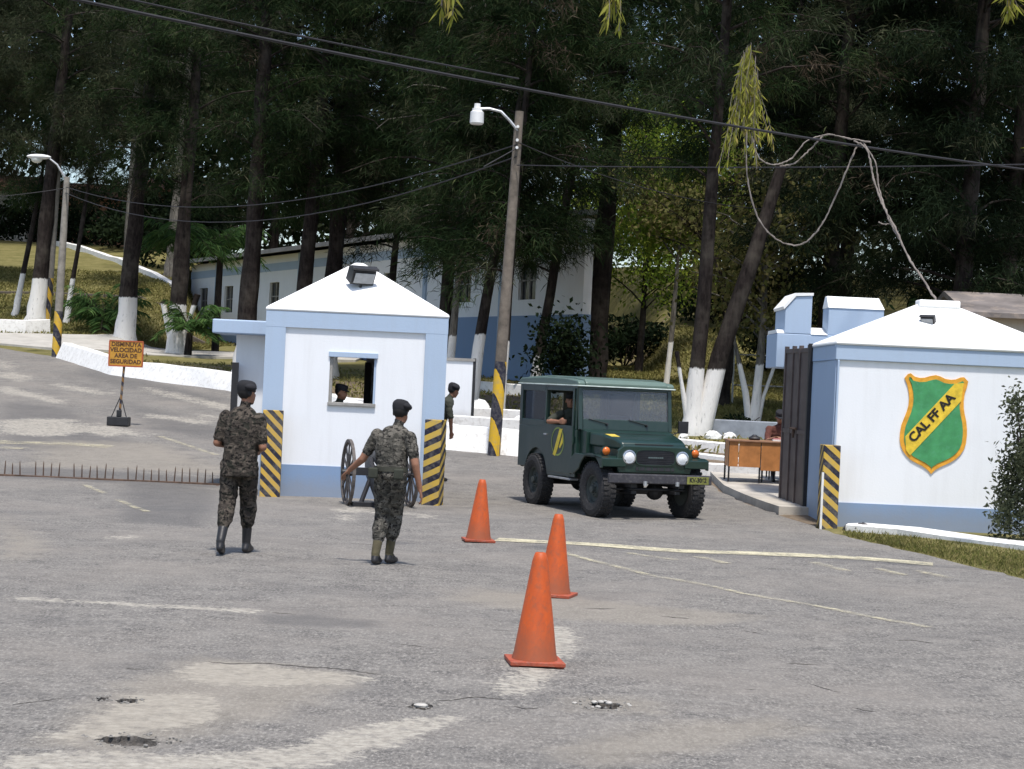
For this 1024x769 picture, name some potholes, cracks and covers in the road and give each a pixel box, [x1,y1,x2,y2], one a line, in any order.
crack [439,697,537,709]
pothole [81,732,182,750]
pothole [407,700,439,710]
pothole [572,697,632,711]
crack [212,662,383,676]
pothole [110,696,145,704]
